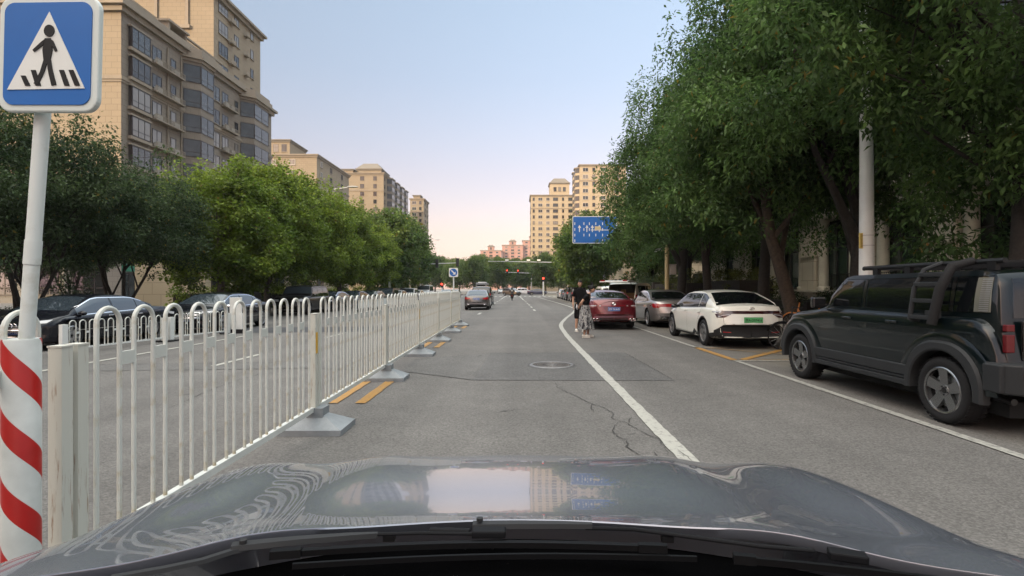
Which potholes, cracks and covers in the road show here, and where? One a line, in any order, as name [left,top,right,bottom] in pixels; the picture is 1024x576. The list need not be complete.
crack [555,381,692,461]
manhole cover [528,361,577,369]
